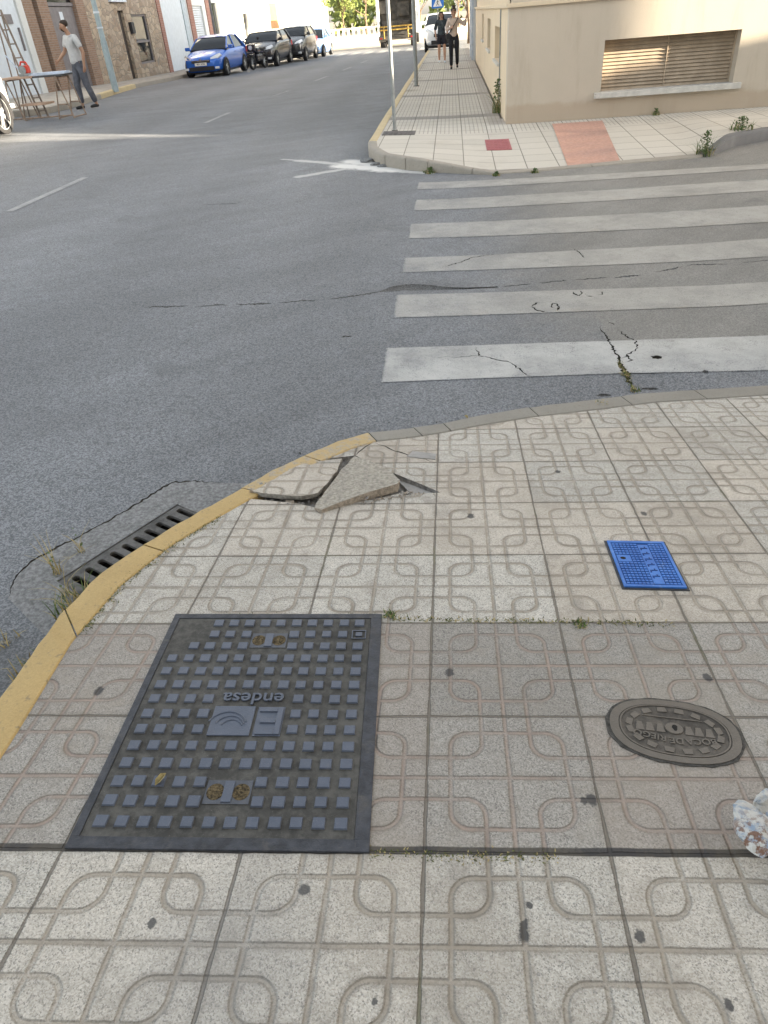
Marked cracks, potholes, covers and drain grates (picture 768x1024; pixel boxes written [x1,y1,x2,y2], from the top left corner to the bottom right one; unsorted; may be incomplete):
drain grate [57,504,198,595]
manhole cover [605,698,746,768]
crack [600,322,638,387]
manhole cover [65,614,382,853]
utility cover [604,540,690,591]
pothole [263,456,440,507]
crack [9,480,223,596]
